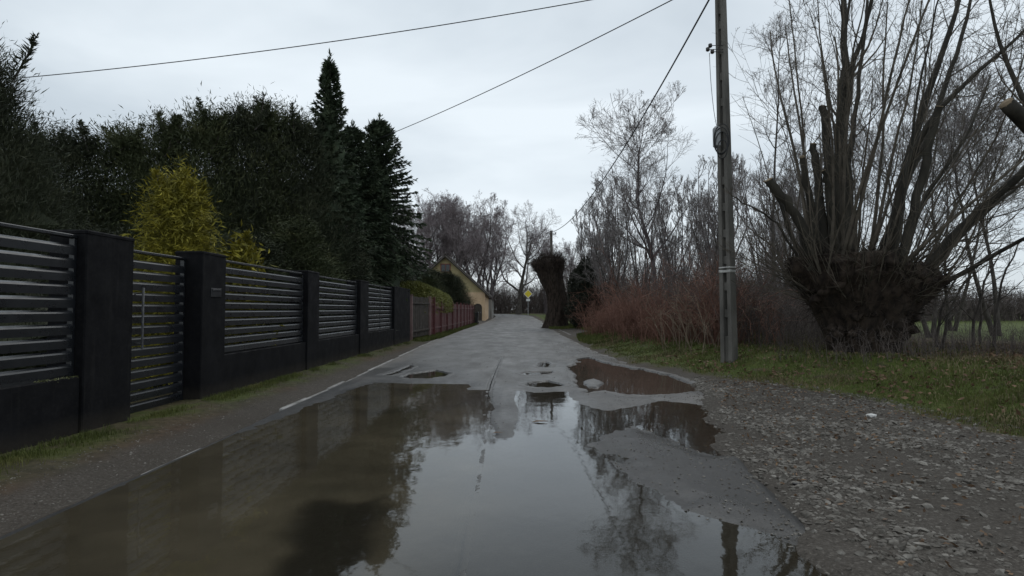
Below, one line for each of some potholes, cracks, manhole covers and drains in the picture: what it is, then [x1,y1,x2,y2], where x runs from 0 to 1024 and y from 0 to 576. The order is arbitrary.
pothole [395,369,454,379]
pothole [518,379,571,388]
pothole [565,357,699,397]
